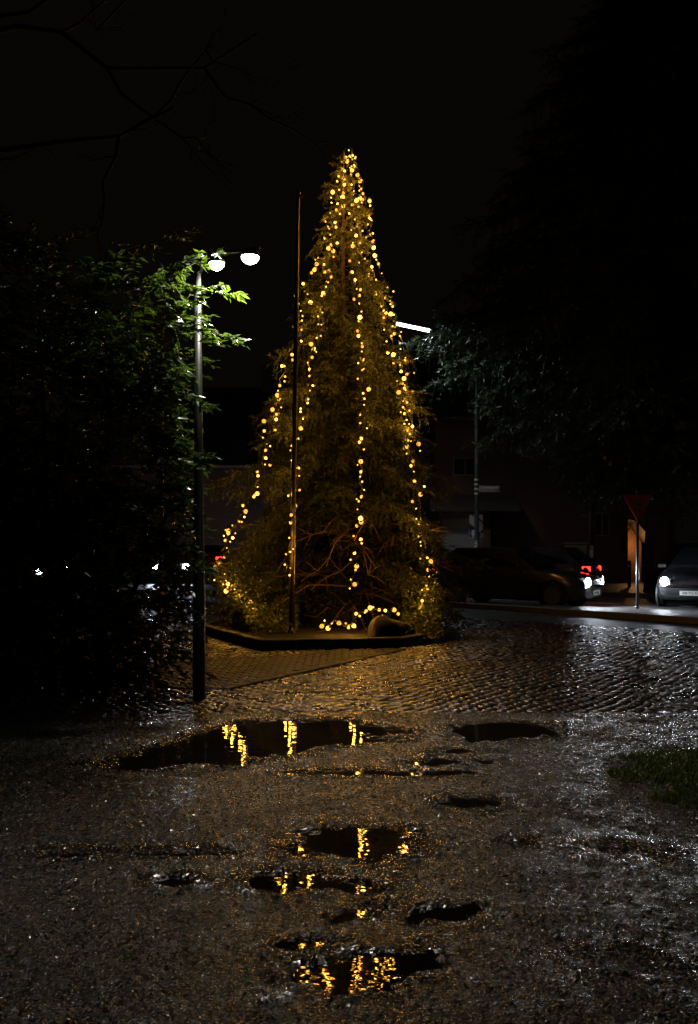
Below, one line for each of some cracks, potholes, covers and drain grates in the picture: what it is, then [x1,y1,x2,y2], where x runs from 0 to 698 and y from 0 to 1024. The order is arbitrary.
pothole [266,935,455,997]
pothole [90,716,424,771]
pothole [427,789,512,810]
pothole [399,892,506,931]
pothole [229,863,430,902]
pothole [442,718,569,744]
pothole [265,821,444,867]
pothole [140,868,223,889]
